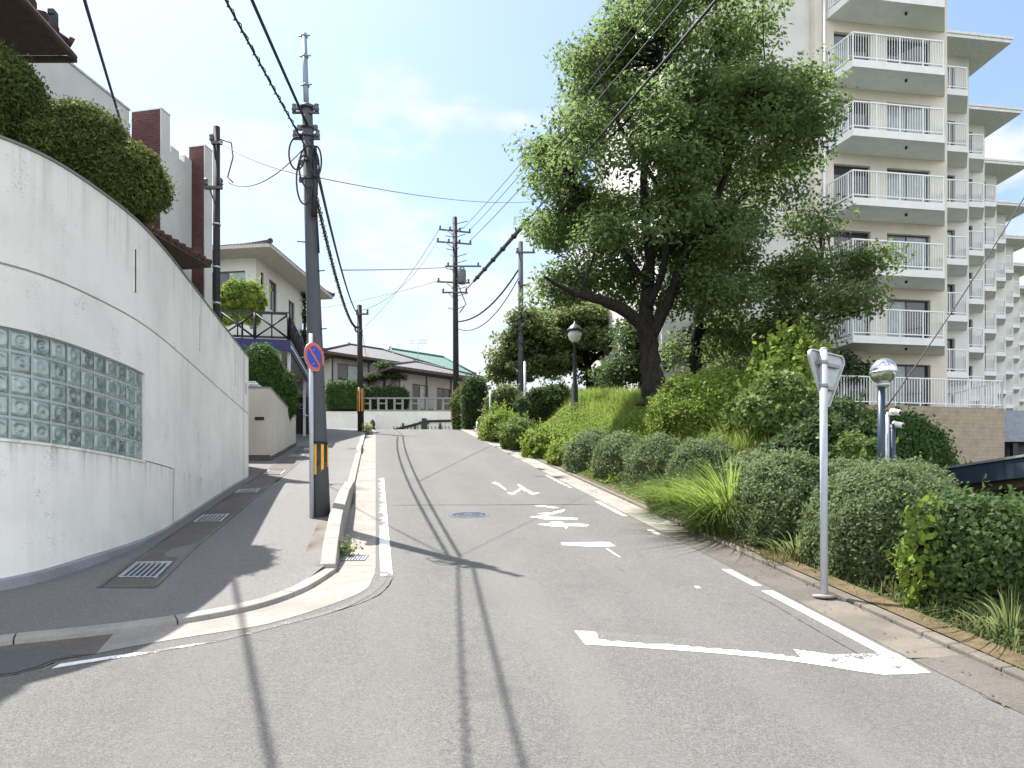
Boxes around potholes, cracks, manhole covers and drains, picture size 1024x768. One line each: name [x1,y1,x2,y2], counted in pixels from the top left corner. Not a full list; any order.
drain grate [118,561,173,578]
drain grate [193,513,230,522]
drain grate [341,555,369,566]
